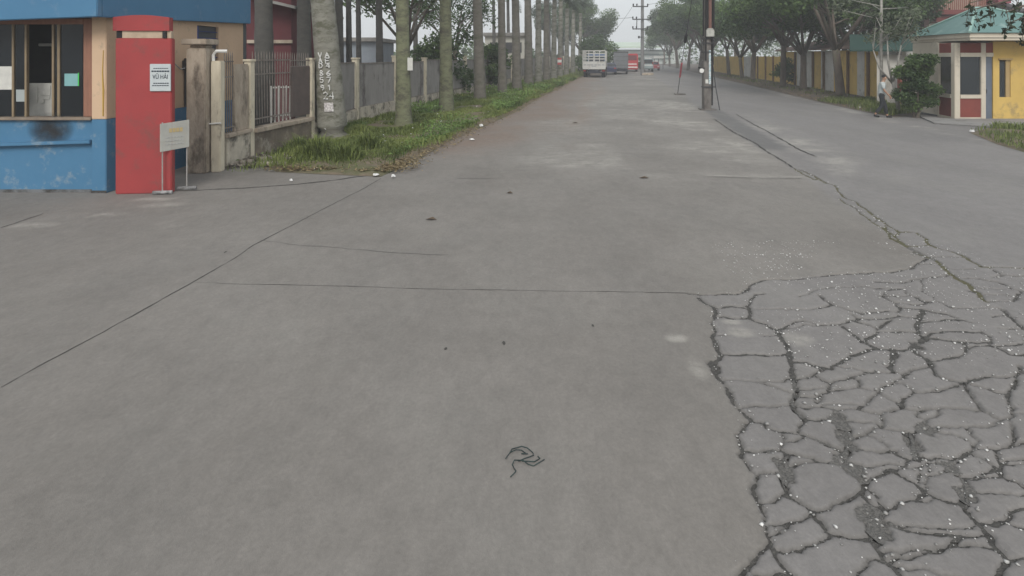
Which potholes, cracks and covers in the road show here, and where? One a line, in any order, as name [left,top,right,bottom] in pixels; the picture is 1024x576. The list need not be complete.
crack [689,260,1024,576]
crack [715,115,817,167]
